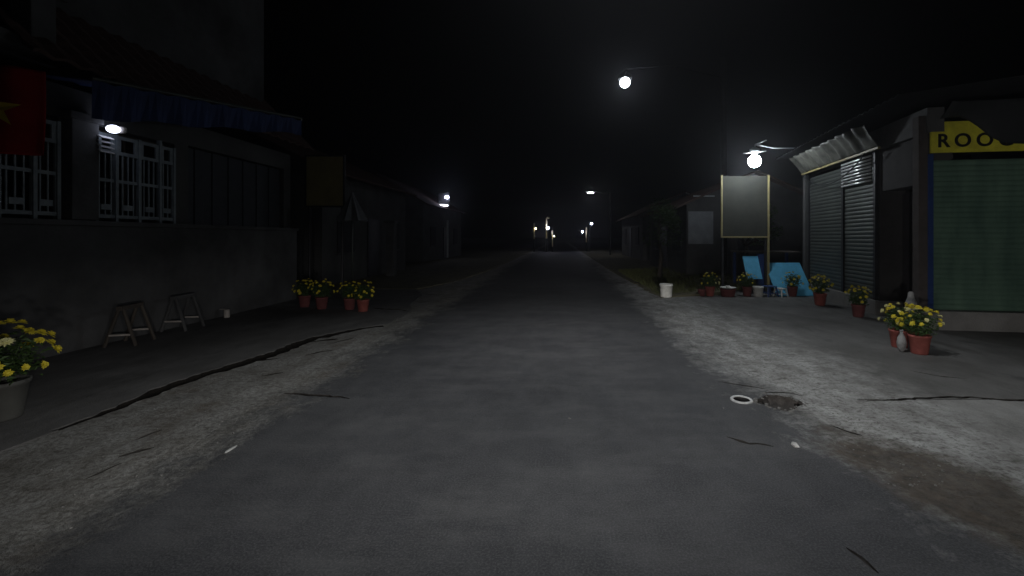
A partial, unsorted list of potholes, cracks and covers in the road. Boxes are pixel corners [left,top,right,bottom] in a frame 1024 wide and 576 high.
crack [54,308,406,480]
crack [728,437,773,447]
crack [718,381,802,396]
crack [846,547,879,573]
pothole [753,392,809,413]
manhole cover [730,395,753,404]
